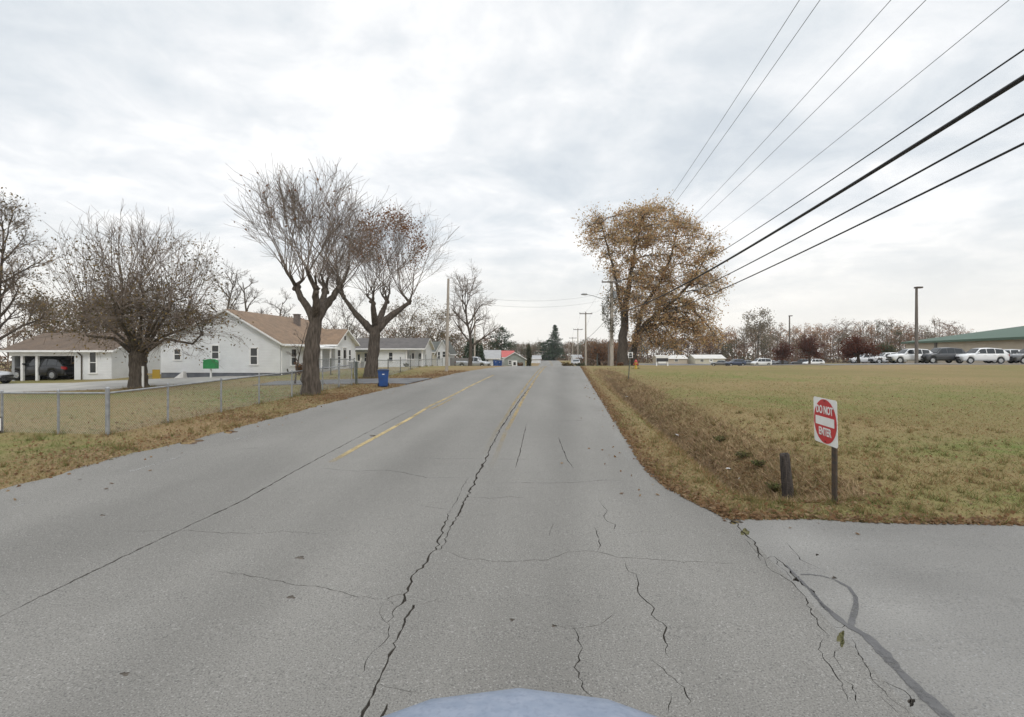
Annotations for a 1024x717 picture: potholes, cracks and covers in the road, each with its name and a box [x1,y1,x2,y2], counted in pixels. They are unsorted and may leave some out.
crack [625,563,668,651]
crack [361,392,526,717]
crack [818,643,872,701]
crack [758,554,825,626]
